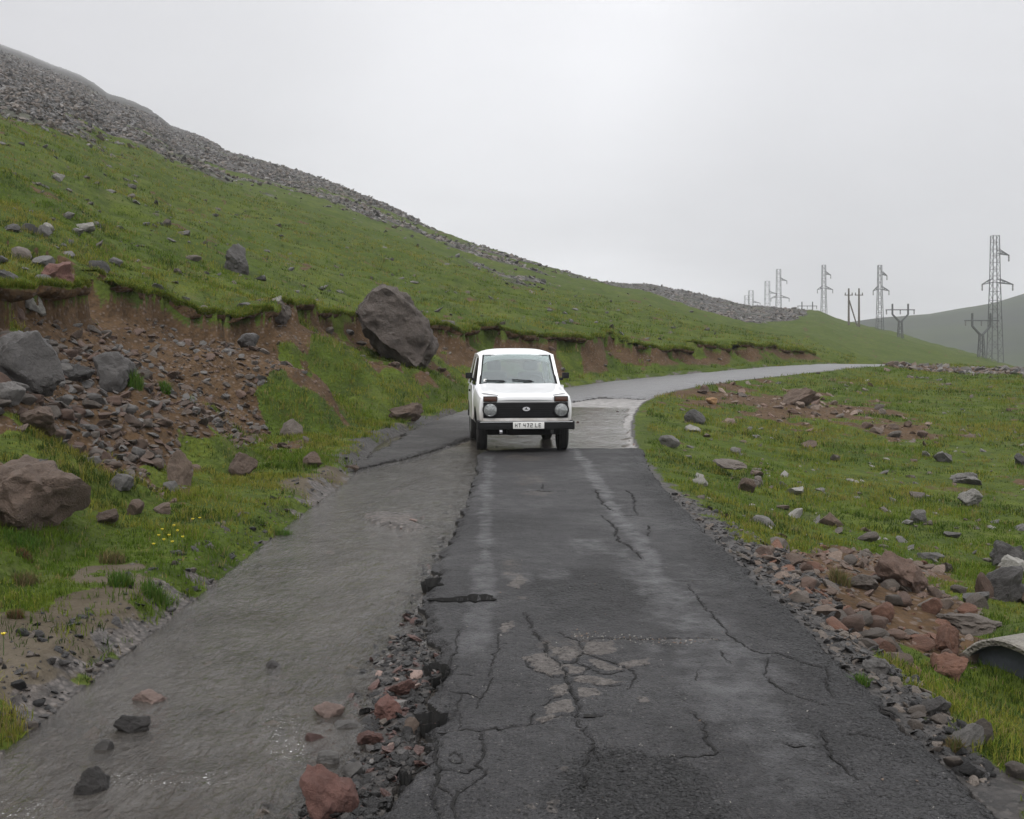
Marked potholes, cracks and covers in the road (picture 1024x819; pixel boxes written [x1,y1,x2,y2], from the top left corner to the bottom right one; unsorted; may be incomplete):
crack [595,490,651,558]
pothole [426,594,497,603]
crack [601,581,834,706]
crack [391,616,637,819]
crack [785,704,899,780]
pothole [420,577,444,593]
pothole [423,662,450,690]
pothole [414,711,449,738]
crack [659,712,719,758]
